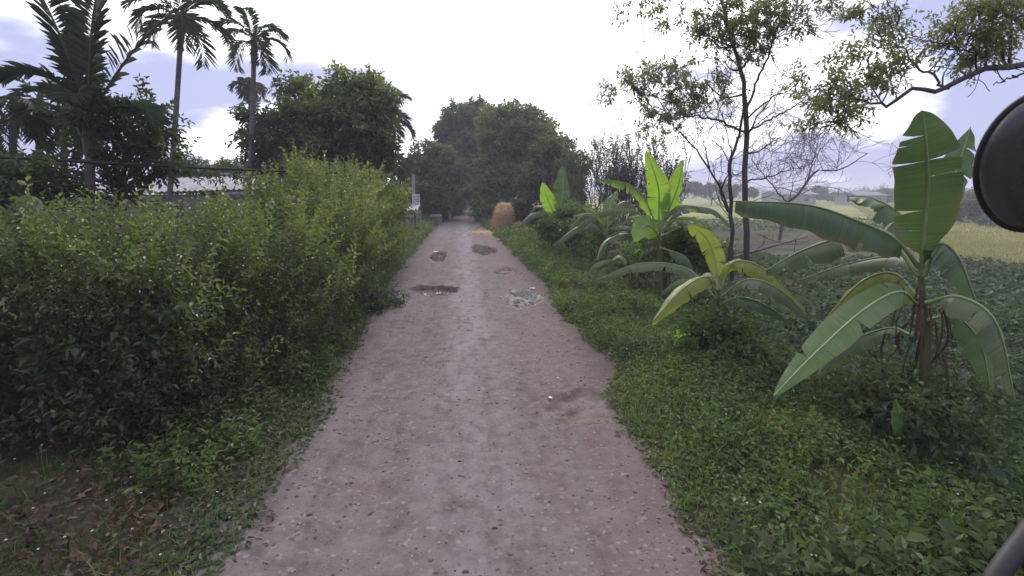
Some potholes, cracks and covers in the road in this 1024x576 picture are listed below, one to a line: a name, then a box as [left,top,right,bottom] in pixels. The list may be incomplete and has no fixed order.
pothole [429,251,446,262]
pothole [493,266,525,276]
pothole [472,244,498,256]
pothole [409,285,460,298]
pothole [500,289,546,309]
